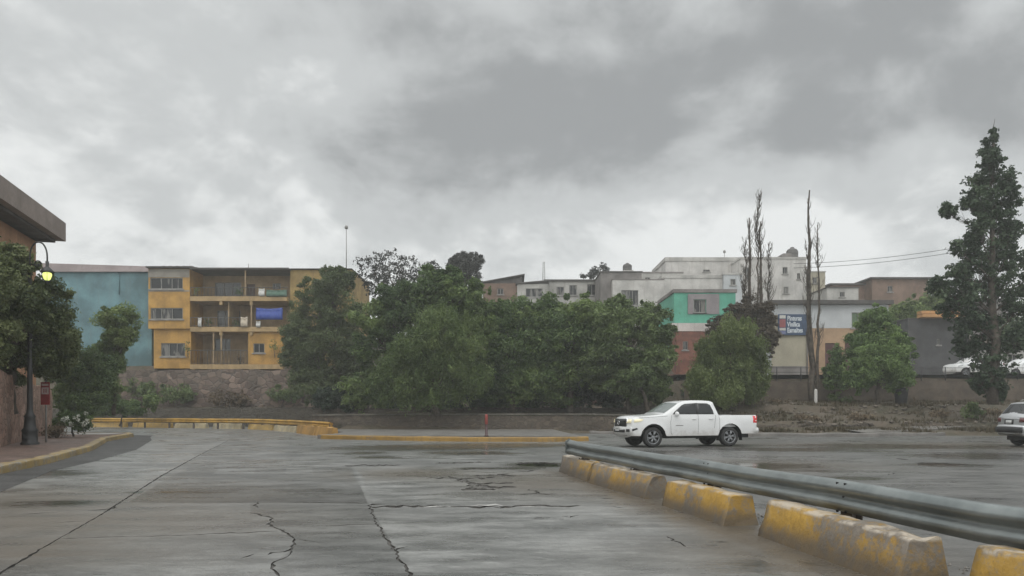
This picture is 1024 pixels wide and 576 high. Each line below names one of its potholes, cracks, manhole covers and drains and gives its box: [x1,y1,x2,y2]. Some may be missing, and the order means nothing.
crack [242,502,364,576]
crack [430,467,550,495]
